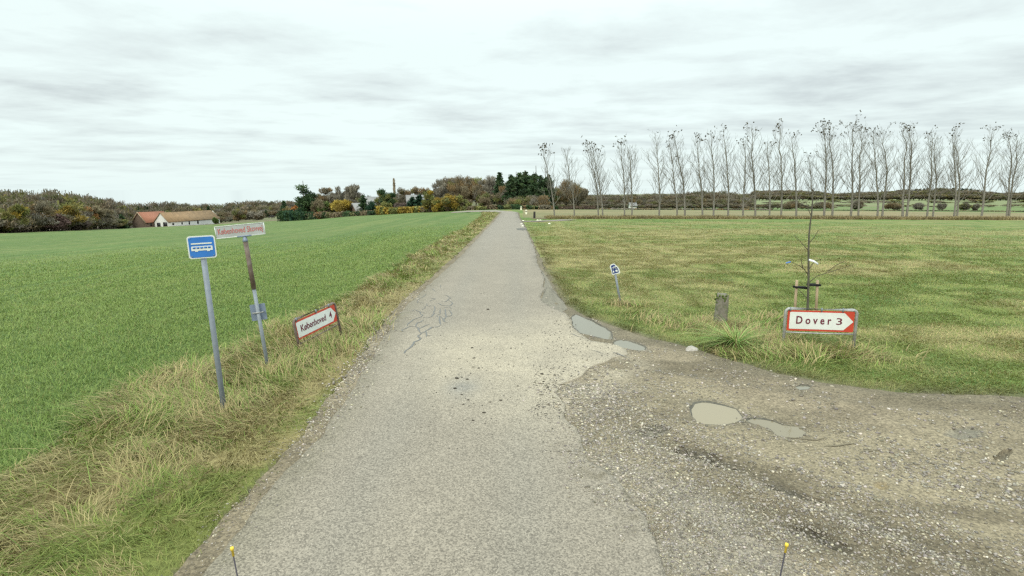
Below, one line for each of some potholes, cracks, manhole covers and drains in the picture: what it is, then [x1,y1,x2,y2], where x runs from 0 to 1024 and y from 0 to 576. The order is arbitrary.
pothole [571,315,613,339]
pothole [689,401,743,425]
crack [401,285,453,353]
pothole [613,340,647,351]
pothole [746,417,806,438]
